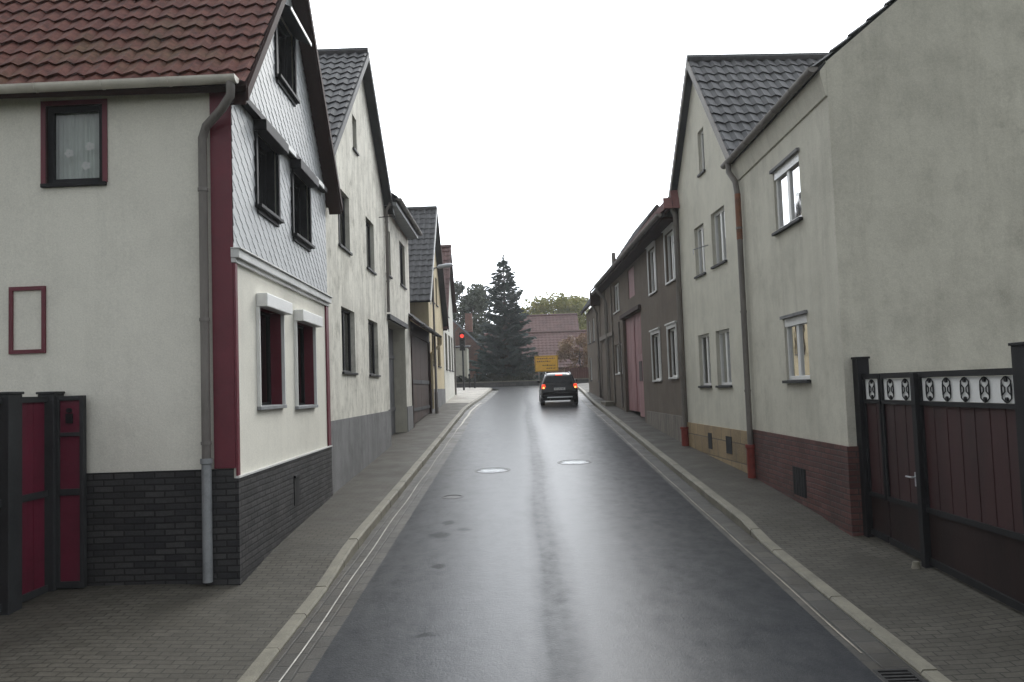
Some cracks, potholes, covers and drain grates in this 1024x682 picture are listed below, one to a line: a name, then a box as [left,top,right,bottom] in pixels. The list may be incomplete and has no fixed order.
drain grate [872,668,925,682]
